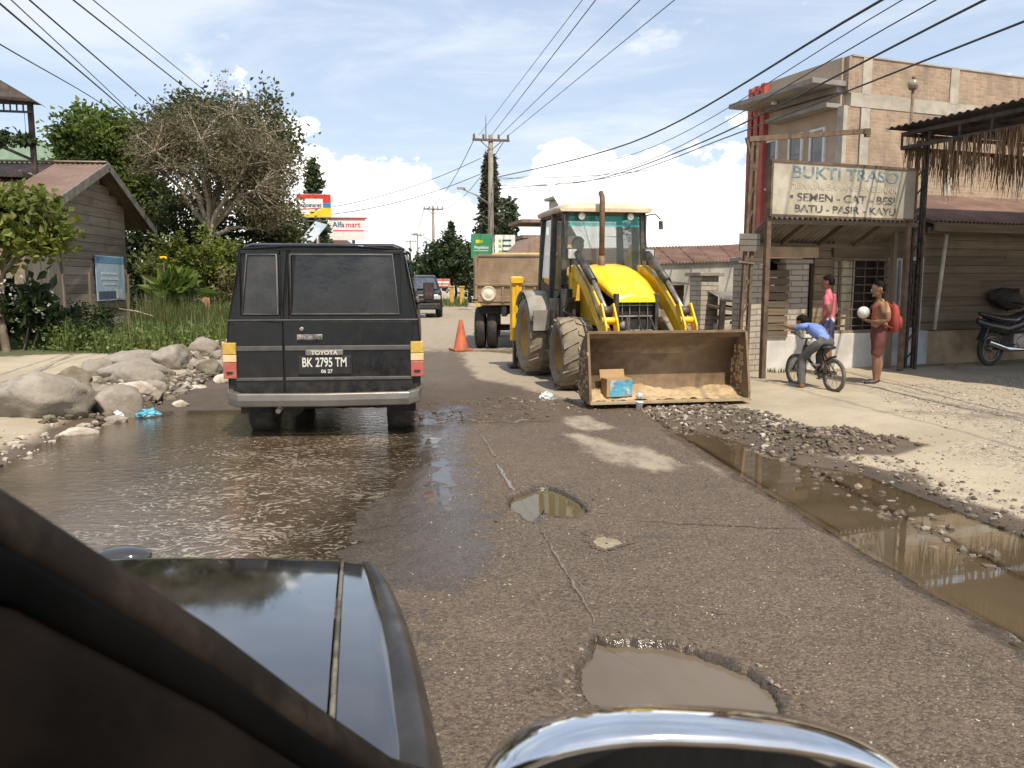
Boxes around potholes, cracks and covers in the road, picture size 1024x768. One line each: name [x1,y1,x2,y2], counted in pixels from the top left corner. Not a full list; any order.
crack [539,511,609,636]
crack [659,521,808,530]
crack [495,462,516,493]
pothole [538,621,829,725]
pothole [487,482,610,530]
